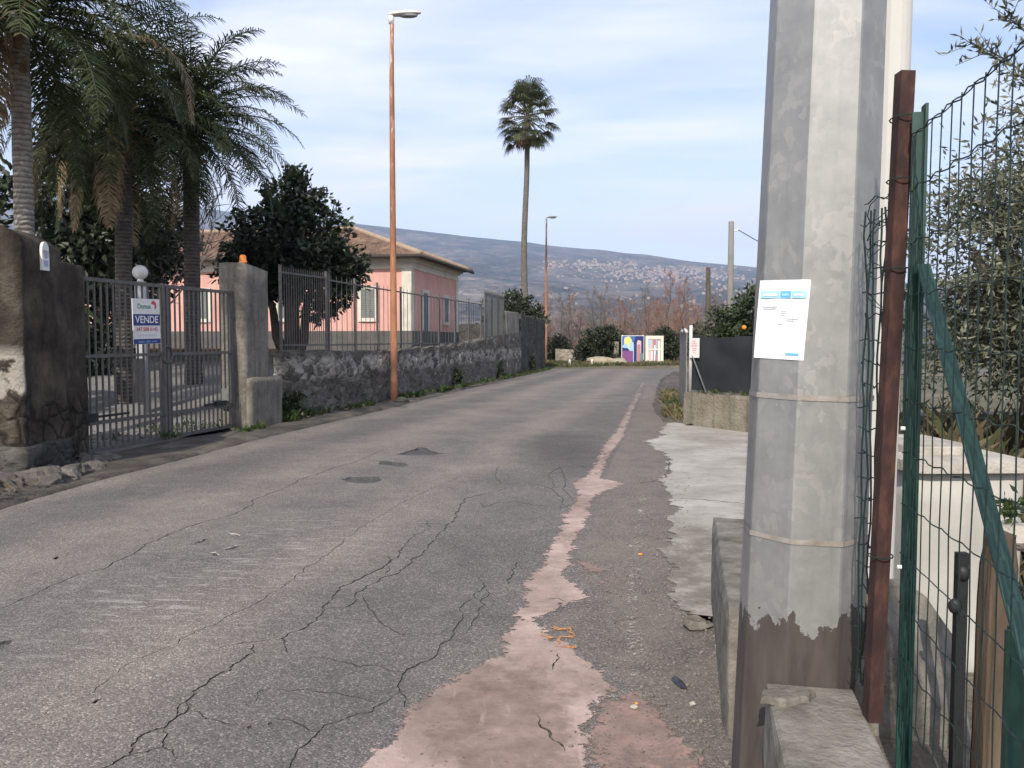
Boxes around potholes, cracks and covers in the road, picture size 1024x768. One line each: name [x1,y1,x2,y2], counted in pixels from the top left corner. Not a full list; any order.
pothole [399,447,444,456]
crack [103,486,511,768]
